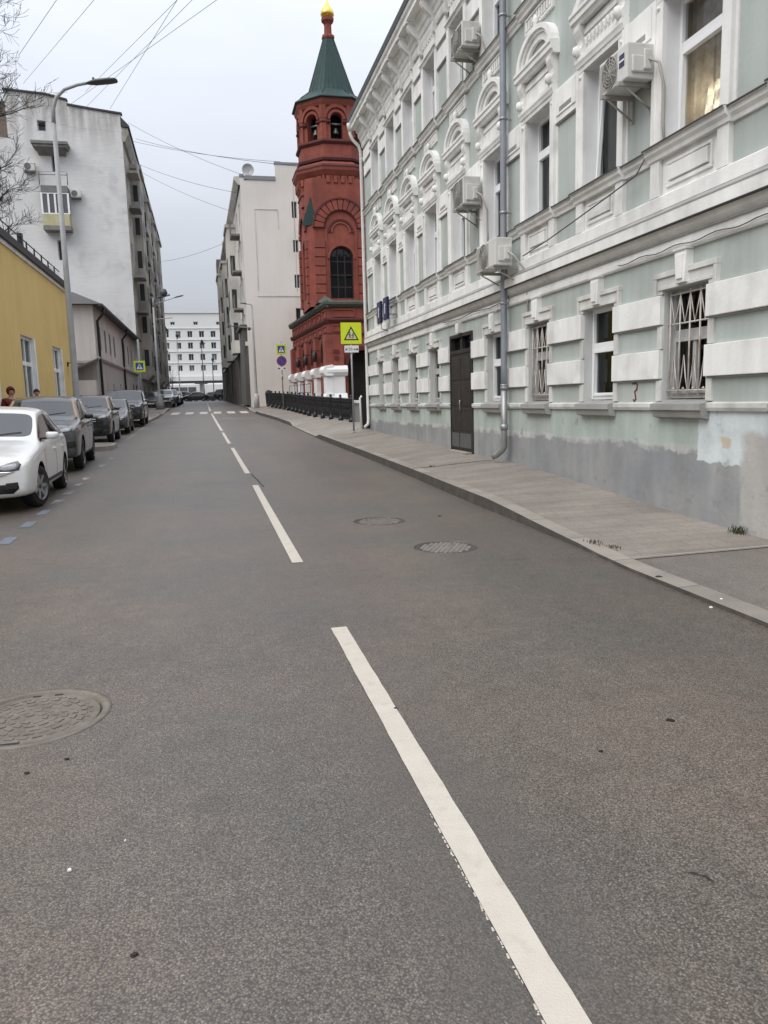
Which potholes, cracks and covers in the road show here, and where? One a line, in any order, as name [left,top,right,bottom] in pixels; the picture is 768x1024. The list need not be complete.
manhole cover [353,517,406,525]
manhole cover [0,688,112,750]
manhole cover [413,541,478,554]
